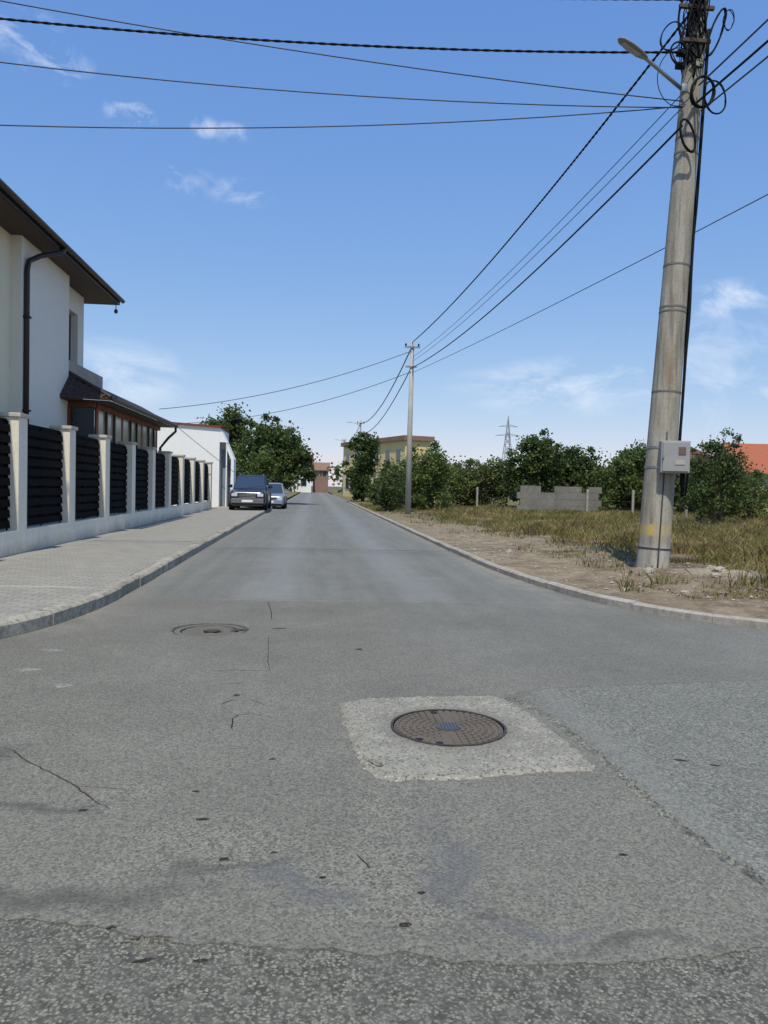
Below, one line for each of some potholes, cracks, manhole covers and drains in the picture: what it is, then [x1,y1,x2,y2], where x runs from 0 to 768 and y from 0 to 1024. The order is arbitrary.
manhole cover [171,623,249,637]
crack [222,638,271,730]
crack [2,747,127,809]
